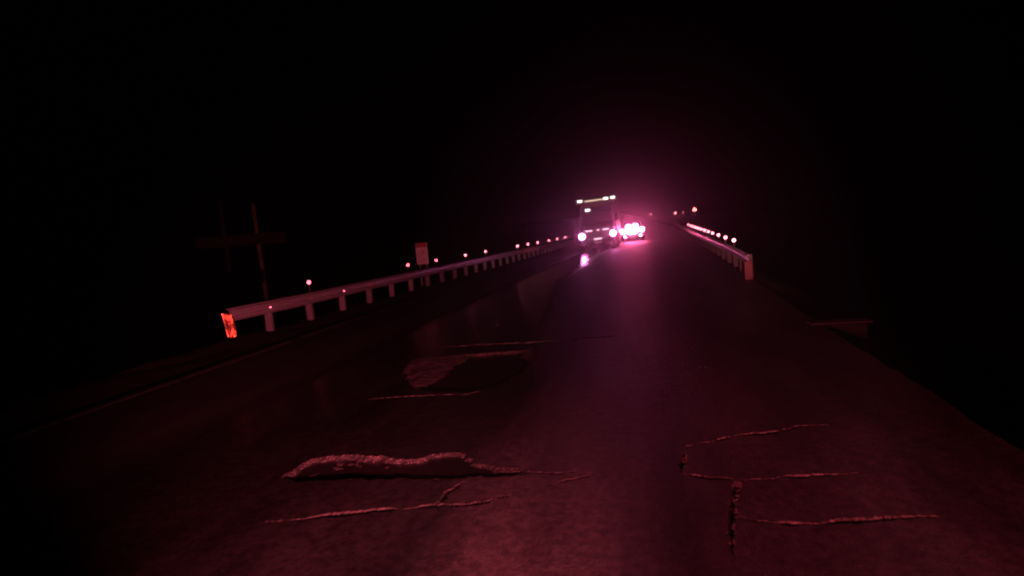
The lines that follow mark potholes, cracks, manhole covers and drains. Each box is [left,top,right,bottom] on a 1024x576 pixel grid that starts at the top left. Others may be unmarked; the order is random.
pothole [281,452,530,483]
crack [376,391,479,399]
crack [442,336,611,348]
pothole [403,350,536,392]
crack [265,471,593,523]
crack [678,425,939,556]
